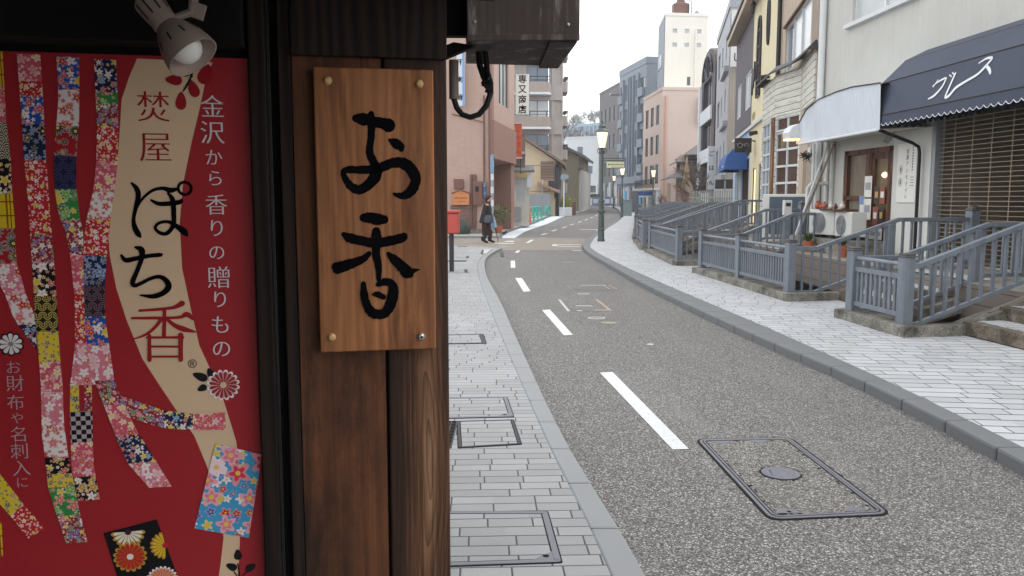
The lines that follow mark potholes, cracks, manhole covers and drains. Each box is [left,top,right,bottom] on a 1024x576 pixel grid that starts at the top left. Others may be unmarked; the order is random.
manhole cover [449,419,522,448]
manhole cover [450,511,563,567]
manhole cover [697,436,888,521]
manhole cover [449,397,514,419]
manhole cover [449,334,487,344]
